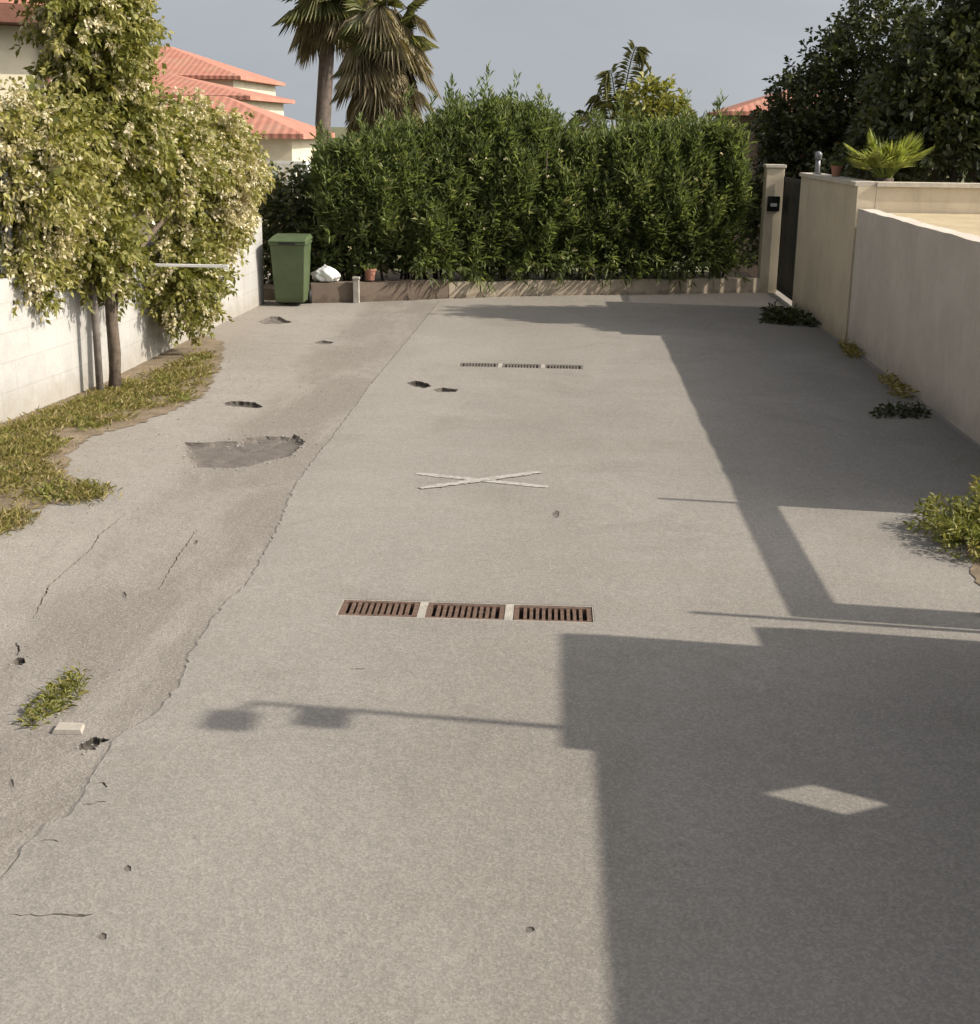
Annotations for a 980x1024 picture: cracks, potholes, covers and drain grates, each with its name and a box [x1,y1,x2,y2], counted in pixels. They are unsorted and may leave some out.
crack [157,530,197,591]
pothole [259,316,291,324]
crack [82,782,108,805]
drain grate [338,600,420,617]
drain grate [425,603,505,620]
drain grate [514,606,592,622]
crack [33,515,124,618]
pothole [78,737,110,750]
pothole [184,434,305,469]
